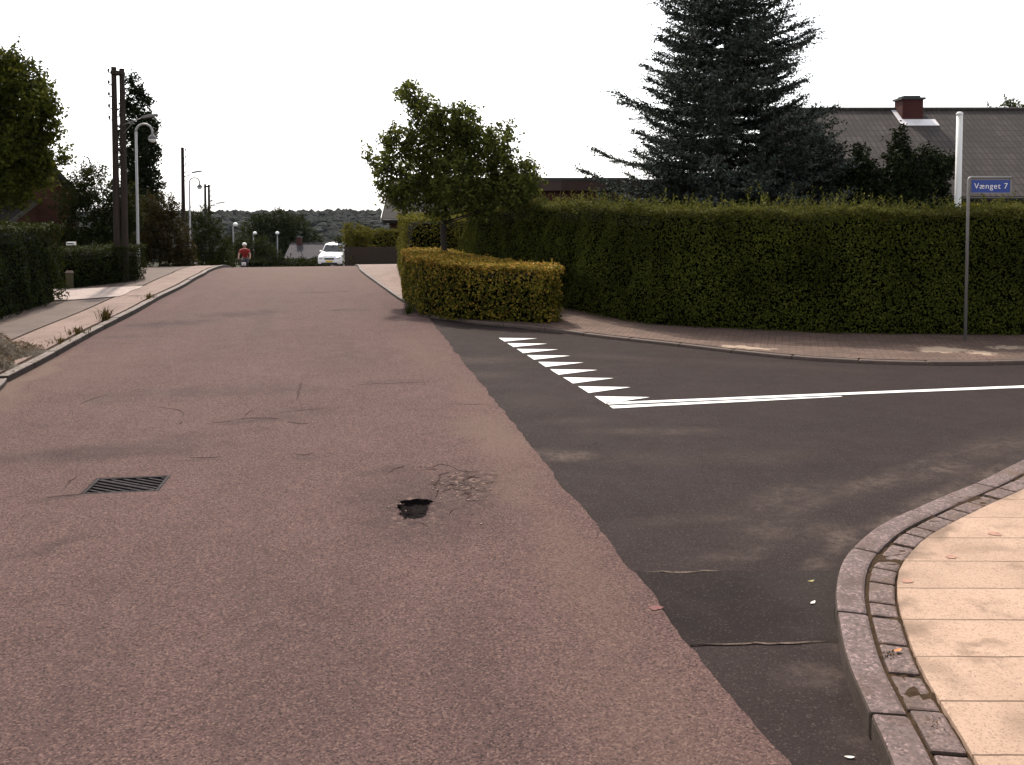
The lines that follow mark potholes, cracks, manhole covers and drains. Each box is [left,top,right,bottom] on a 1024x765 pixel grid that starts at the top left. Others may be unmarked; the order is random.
crack [425,462,493,515]
crack [206,383,323,424]
pothole [395,498,436,520]
